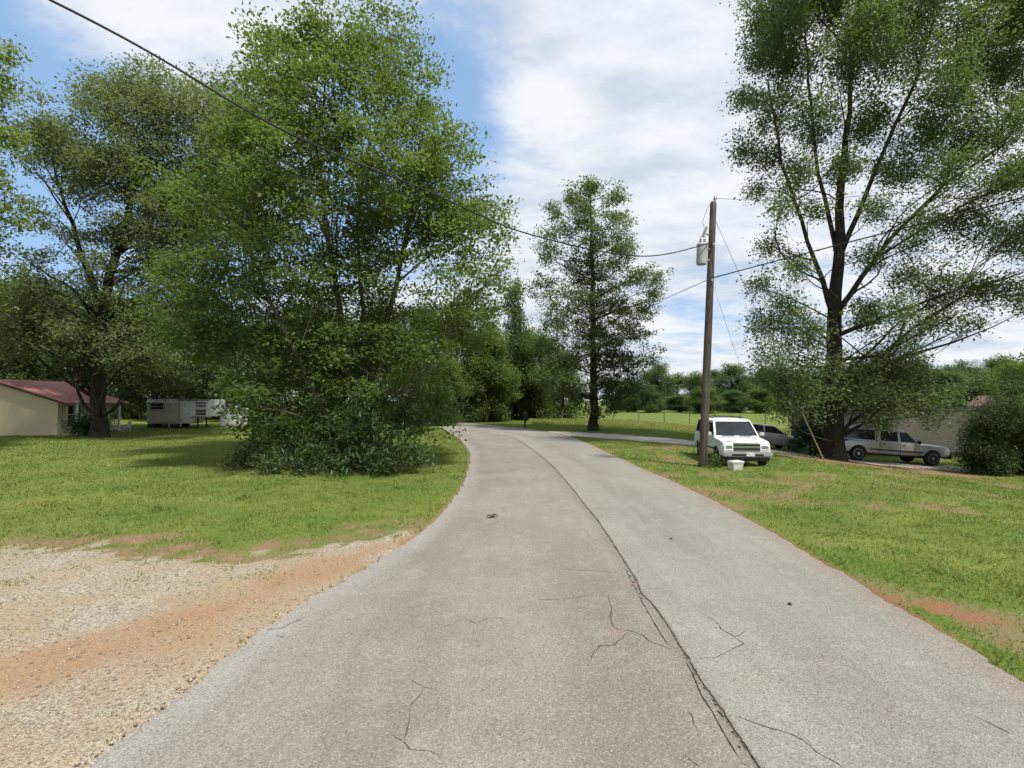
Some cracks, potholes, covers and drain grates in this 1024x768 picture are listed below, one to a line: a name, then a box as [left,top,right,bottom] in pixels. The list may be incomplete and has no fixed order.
crack [693,617,745,660]
crack [590,596,672,661]
crack [392,681,442,756]
crack [733,715,840,766]
